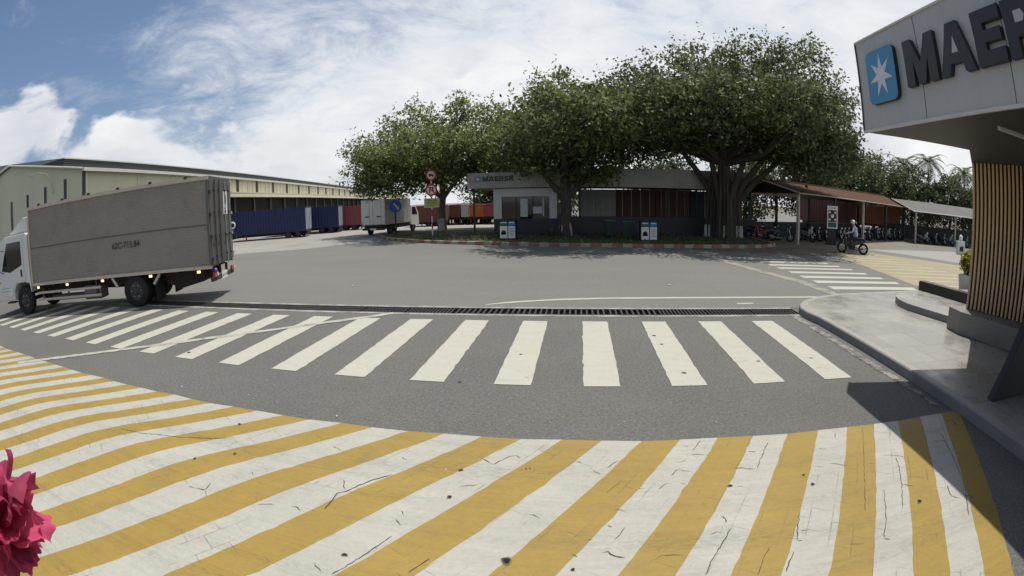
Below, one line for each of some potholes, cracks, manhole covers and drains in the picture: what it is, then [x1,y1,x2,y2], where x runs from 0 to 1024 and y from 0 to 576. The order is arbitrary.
crack [313,457,407,508]
crack [884,455,912,539]
crack [314,512,403,574]
crack [933,420,971,515]
